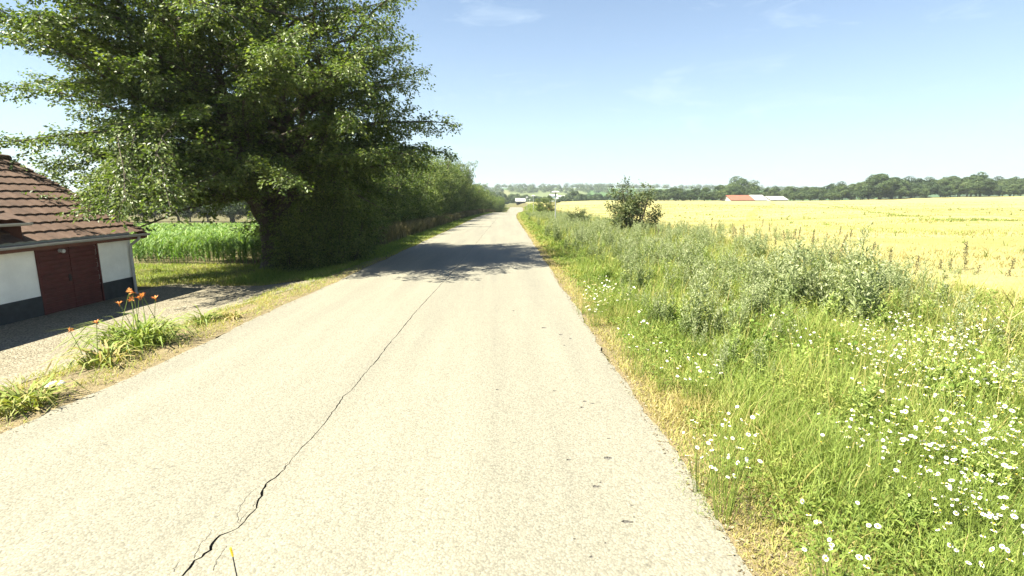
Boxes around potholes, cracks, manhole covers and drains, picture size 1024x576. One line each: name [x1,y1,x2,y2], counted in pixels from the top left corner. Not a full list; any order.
crack [173,222,494,576]
